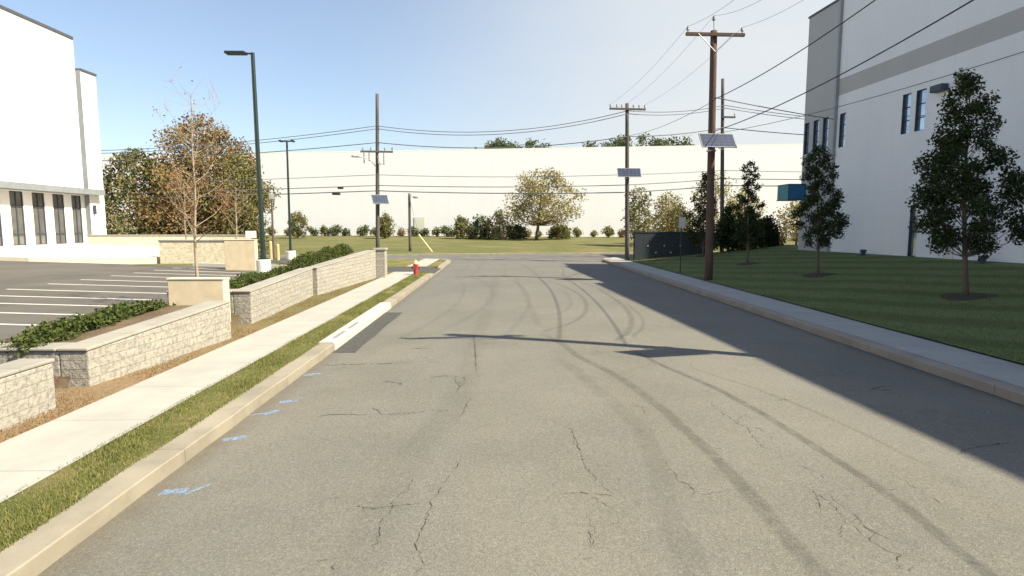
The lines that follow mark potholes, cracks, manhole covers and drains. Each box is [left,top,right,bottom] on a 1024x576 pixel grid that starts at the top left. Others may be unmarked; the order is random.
crack [813,490,913,570]
crack [543,419,618,561]
crack [414,462,459,572]
